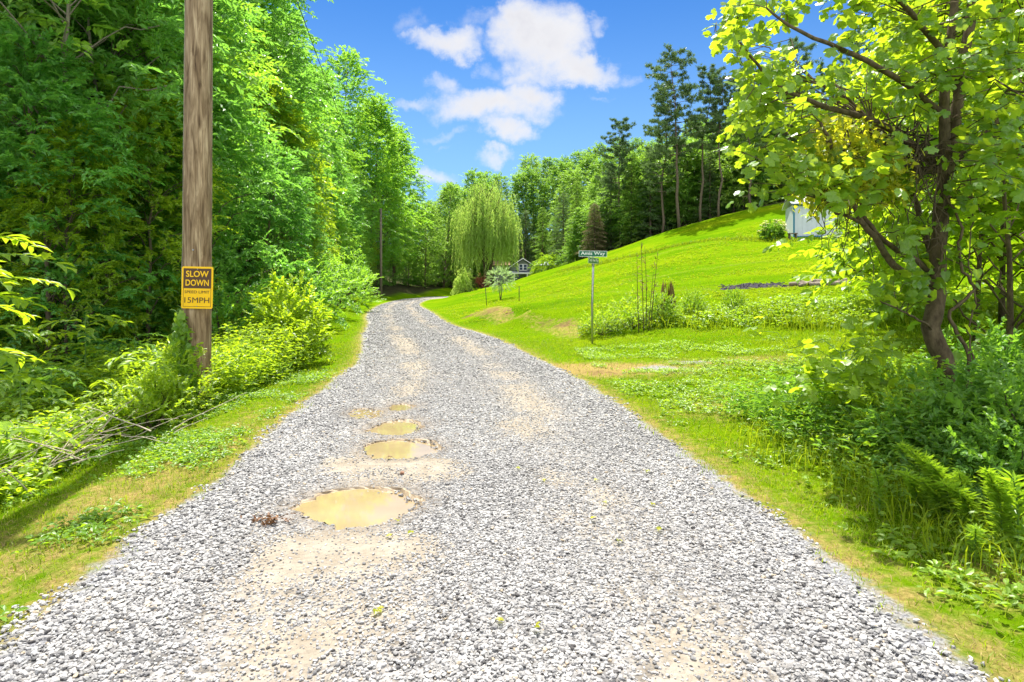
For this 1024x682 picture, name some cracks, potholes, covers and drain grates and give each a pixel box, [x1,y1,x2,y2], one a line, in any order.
pothole [357,435,456,461]
pothole [388,403,419,411]
pothole [344,406,389,420]
pothole [279,481,439,535]
pothole [365,417,429,437]
